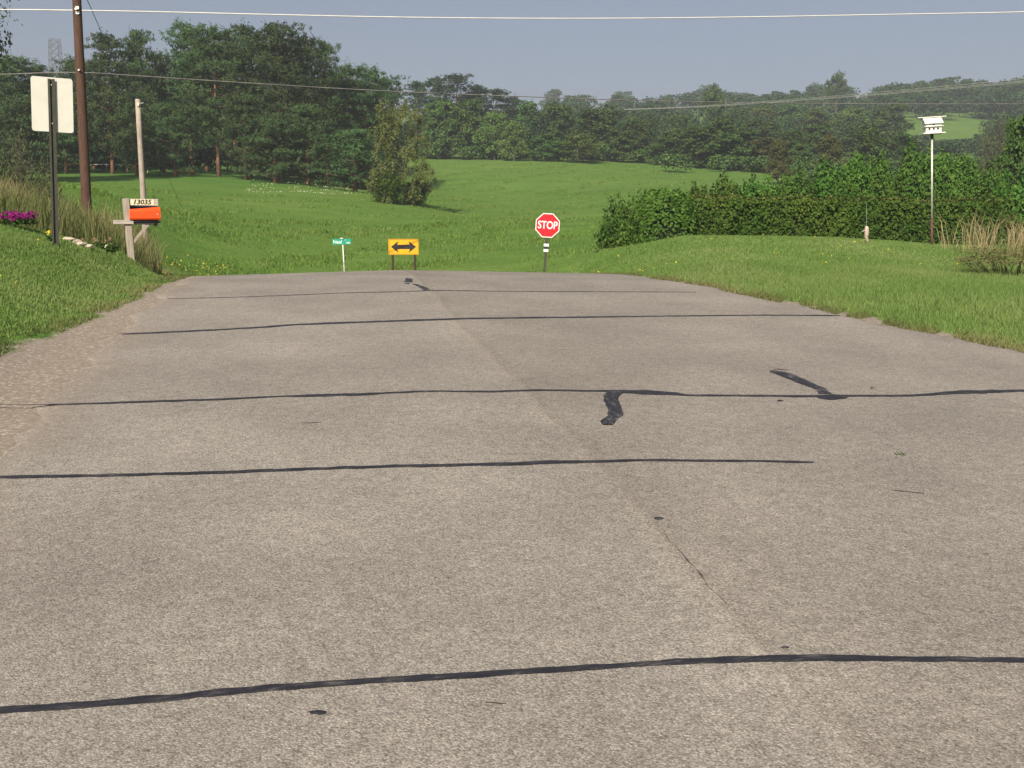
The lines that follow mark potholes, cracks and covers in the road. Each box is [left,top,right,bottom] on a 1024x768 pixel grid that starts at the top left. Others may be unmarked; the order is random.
crack [664,531,729,606]
